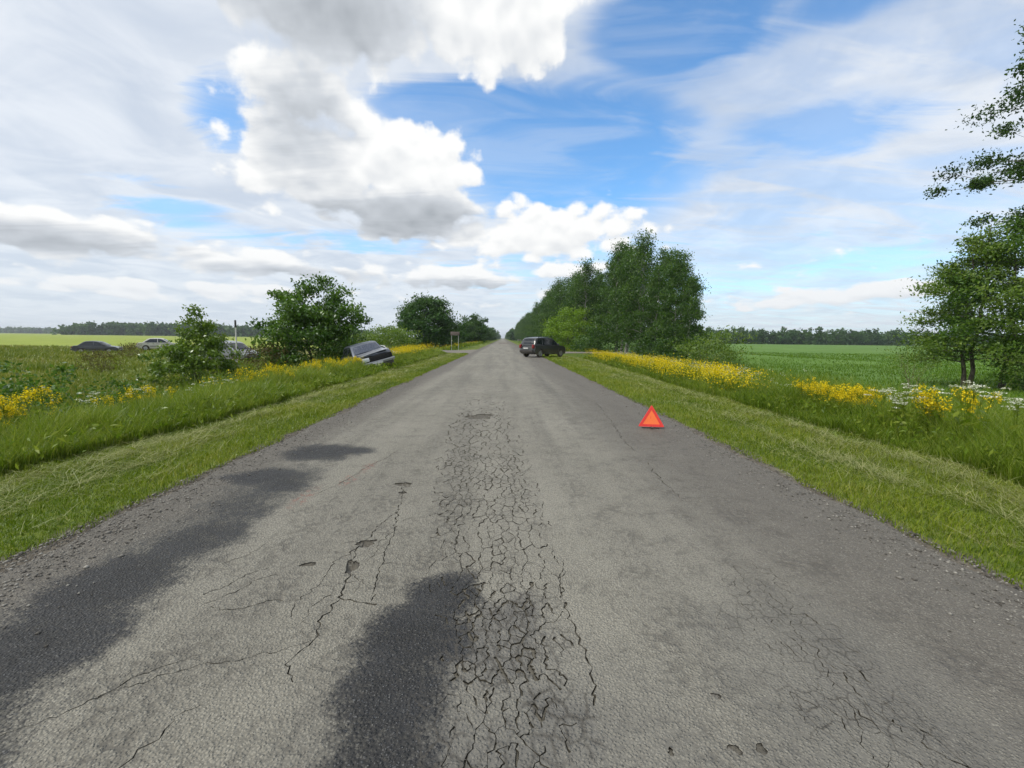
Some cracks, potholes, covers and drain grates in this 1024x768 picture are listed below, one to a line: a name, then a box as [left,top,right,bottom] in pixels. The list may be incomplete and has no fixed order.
crack [119,707,197,768]
pothole [355,539,377,548]
crack [1,487,413,736]
crack [426,394,597,768]
pothole [345,559,359,574]
crack [721,563,971,768]
